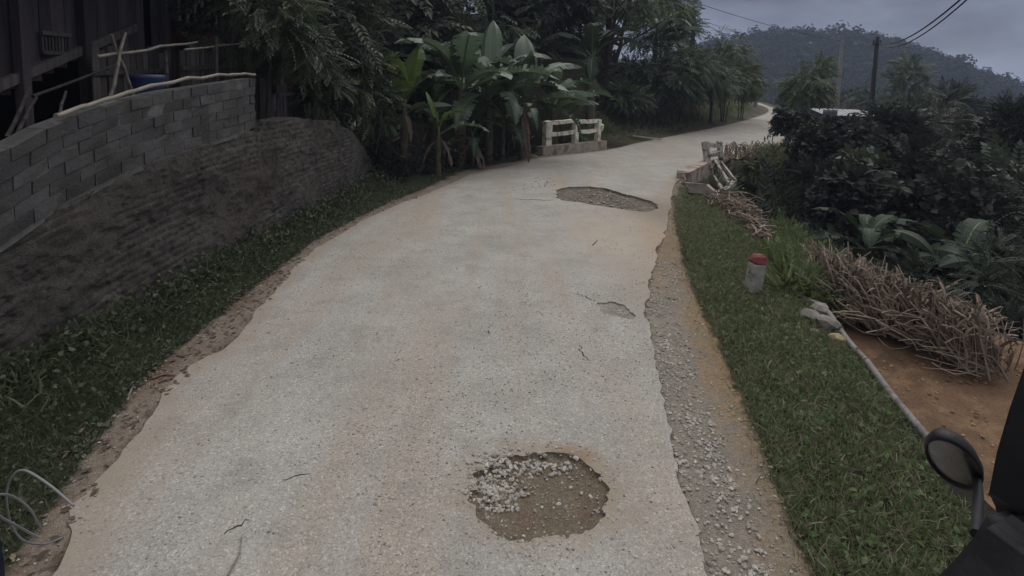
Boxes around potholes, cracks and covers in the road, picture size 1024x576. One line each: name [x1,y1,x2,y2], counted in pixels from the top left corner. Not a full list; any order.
pothole [556,186,658,212]
pothole [467,452,610,543]
pothole [597,301,636,319]
